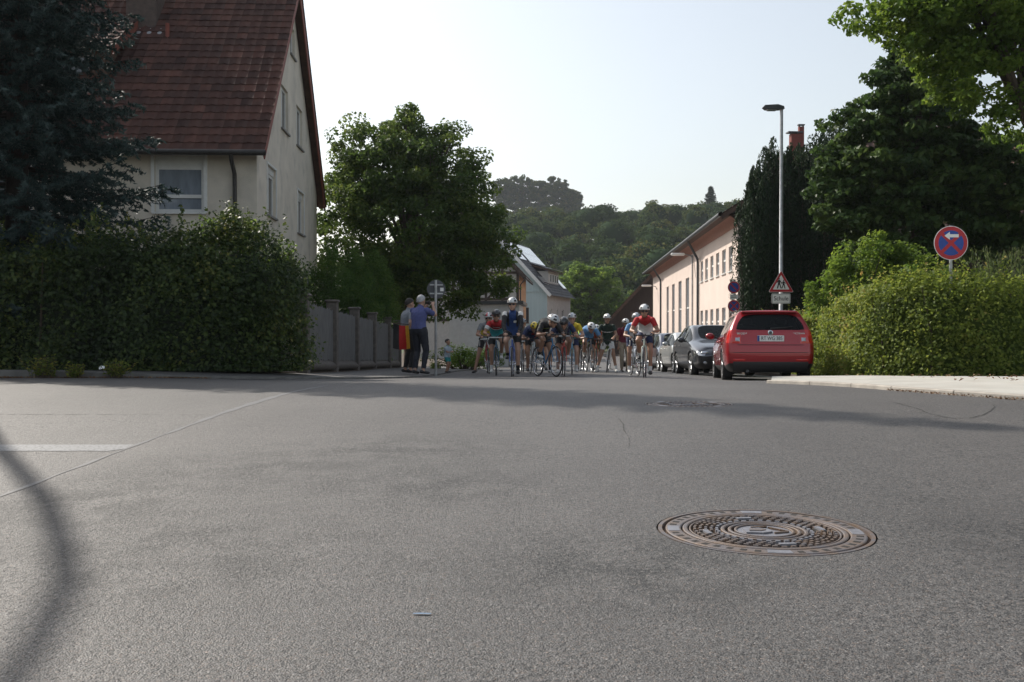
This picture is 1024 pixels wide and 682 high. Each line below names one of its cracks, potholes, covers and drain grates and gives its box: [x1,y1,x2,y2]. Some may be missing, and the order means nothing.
manhole cover [658,509,876,557]
